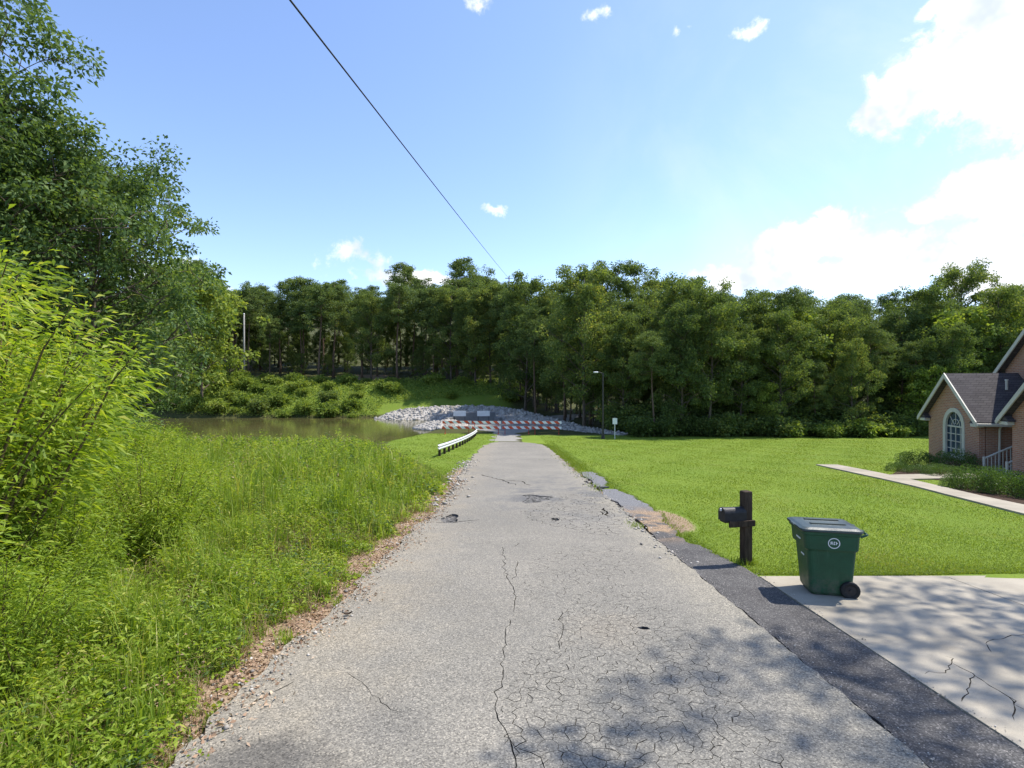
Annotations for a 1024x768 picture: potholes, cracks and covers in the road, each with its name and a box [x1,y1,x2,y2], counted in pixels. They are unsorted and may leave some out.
pothole [523,495,552,503]
crack [494,544,784,768]
pothole [441,514,458,523]
crack [926,657,1023,721]
